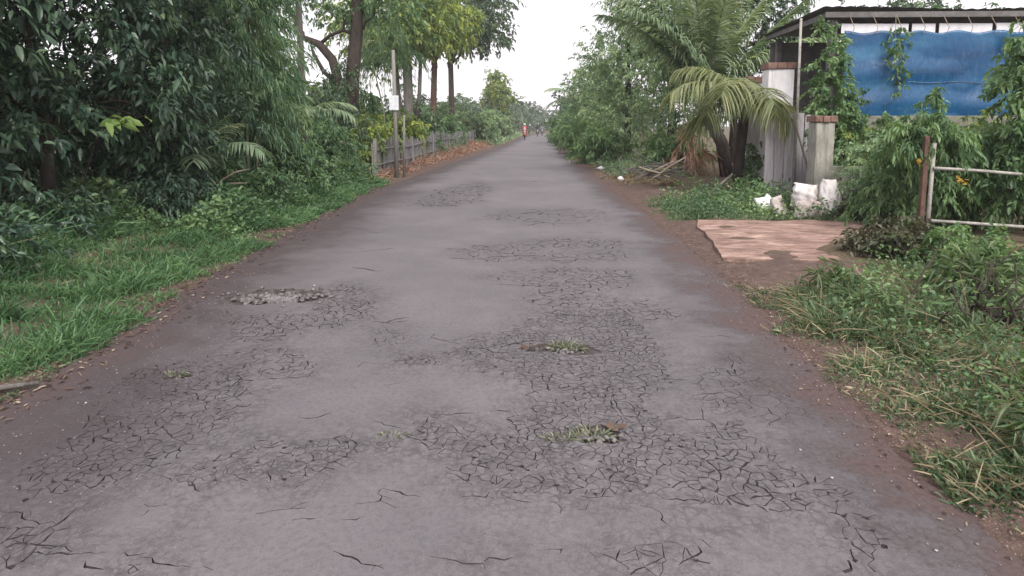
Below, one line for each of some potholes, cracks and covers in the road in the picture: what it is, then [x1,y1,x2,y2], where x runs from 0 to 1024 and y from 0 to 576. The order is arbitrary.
crack [177,181,888,573]
pothole [190,286,337,309]
pothole [516,340,612,355]
crack [0,501,104,570]
crack [15,341,317,502]
pothole [554,424,630,444]
crack [124,552,212,574]
